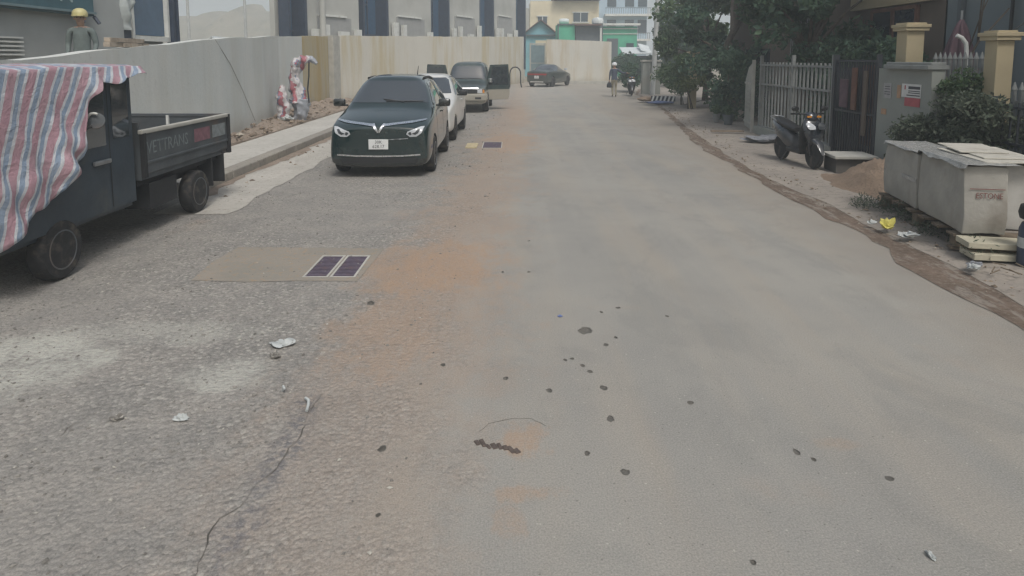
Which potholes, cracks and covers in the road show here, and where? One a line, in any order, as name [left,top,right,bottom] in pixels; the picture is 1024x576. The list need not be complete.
drain grate [330,255,371,277]
crack [196,396,321,574]
drain grate [302,255,346,277]
